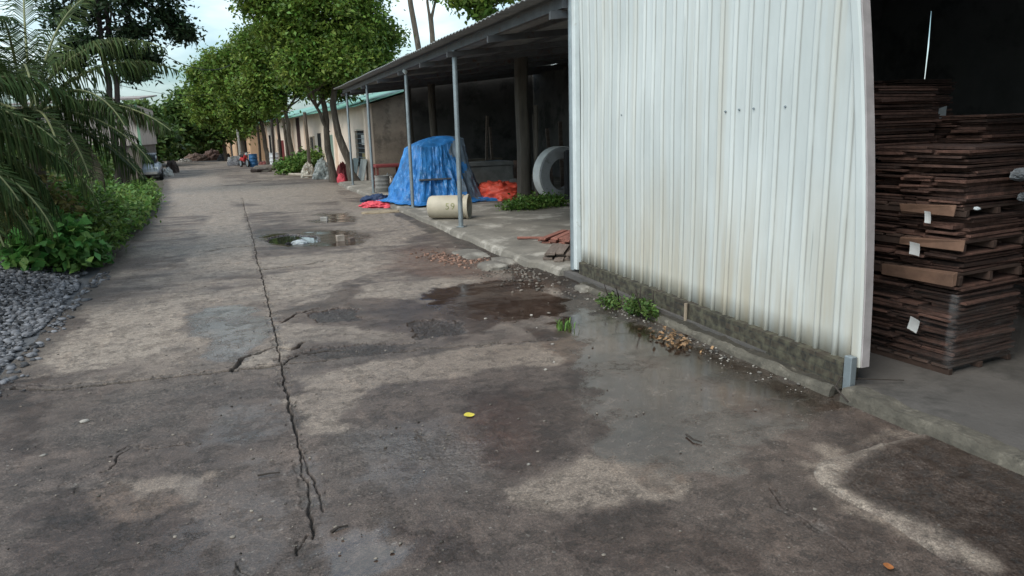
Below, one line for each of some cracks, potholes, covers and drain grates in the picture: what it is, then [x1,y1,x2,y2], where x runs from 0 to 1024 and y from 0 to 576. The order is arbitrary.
crack [201,244,330,272]
crack [98,439,200,469]
pothole [262,233,325,246]
